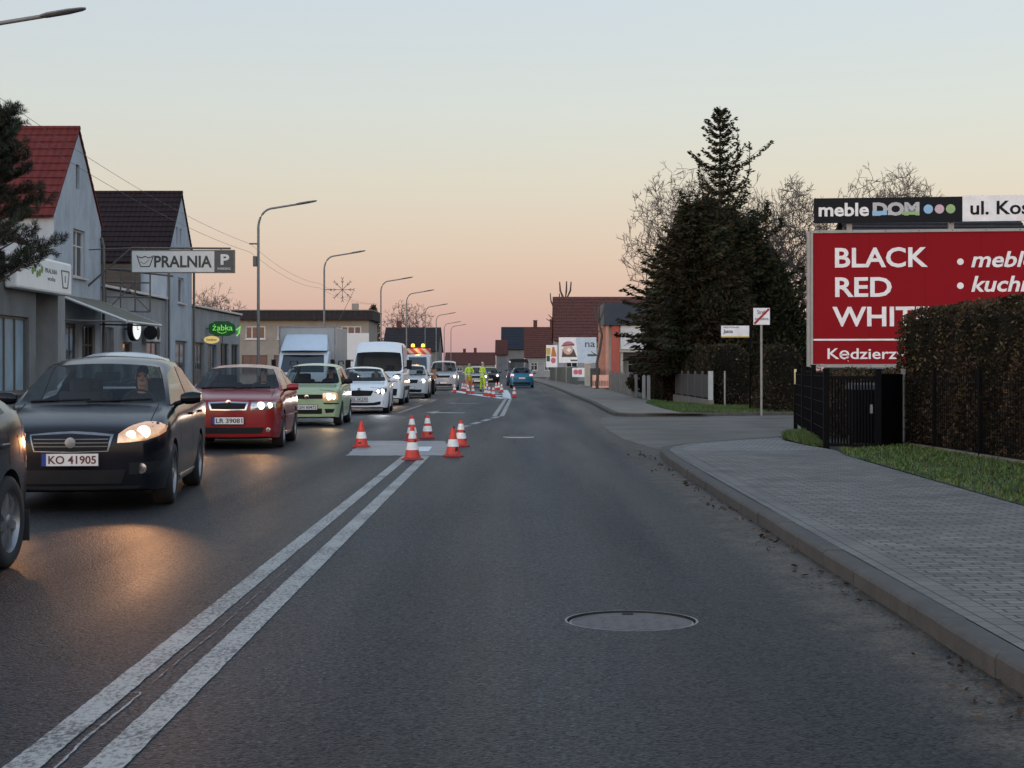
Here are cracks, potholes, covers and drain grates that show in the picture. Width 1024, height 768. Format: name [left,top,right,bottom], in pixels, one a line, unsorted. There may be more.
manhole cover [565,610,698,631]
